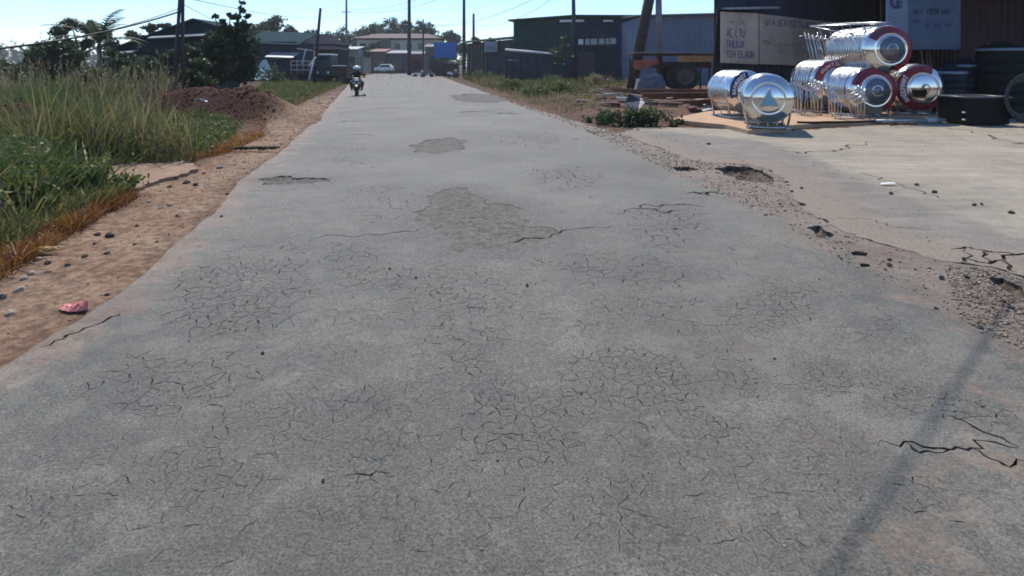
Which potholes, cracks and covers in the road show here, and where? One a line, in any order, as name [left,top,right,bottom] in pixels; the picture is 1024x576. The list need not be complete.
crack [766,142,870,154]
crack [2,185,1024,576]
pothole [806,225,834,238]
pothole [715,166,774,183]
